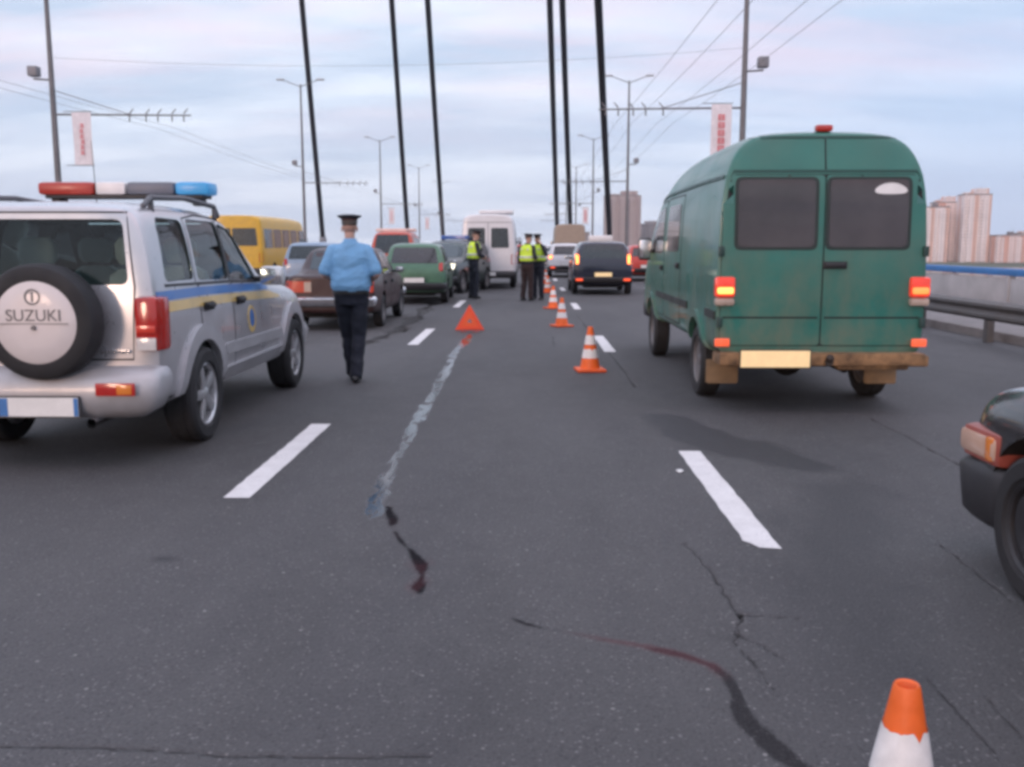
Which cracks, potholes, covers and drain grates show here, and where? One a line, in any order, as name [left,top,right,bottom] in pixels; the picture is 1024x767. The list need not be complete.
crack [931,680,1023,761]
crack [939,545,1012,602]
crack [684,544,800,690]
